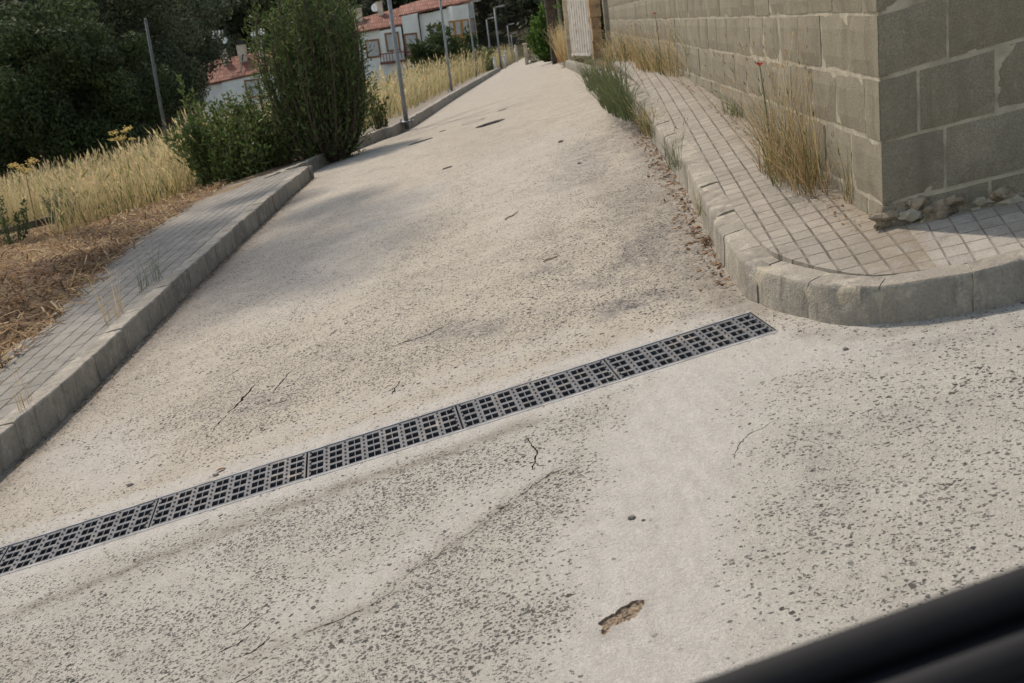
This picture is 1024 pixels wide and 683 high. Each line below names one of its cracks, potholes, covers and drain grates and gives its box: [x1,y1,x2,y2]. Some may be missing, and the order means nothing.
drain grate [456,360,619,429]
drain grate [604,313,775,380]
crack [272,439,554,651]
crack [220,608,271,683]
crack [212,367,291,432]
drain grate [307,406,462,478]
drain grate [149,453,308,528]
drain grate [0,500,158,574]
pothole [598,600,645,635]
